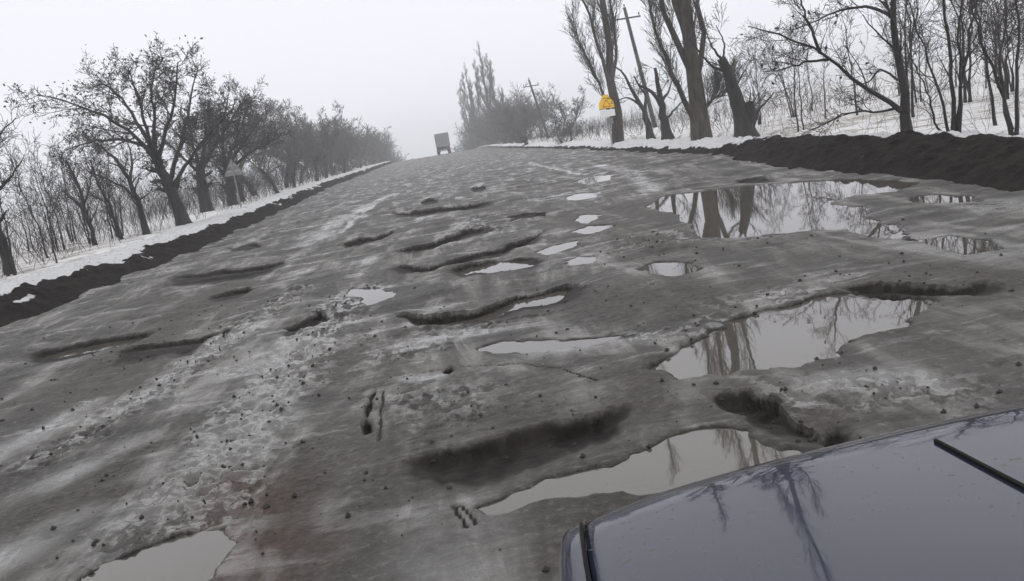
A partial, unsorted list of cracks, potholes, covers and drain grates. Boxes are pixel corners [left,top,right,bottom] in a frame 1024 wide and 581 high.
pothole [631,259,708,277]
pothole [735,175,780,184]
pothole [18,329,159,368]
pothole [710,387,862,449]
pothole [341,230,396,249]
pothole [388,199,498,219]
pothole [903,233,1014,255]
pothole [392,283,600,328]
pothole [640,177,924,241]
pothole [533,238,583,255]
pothole [64,520,244,581]
pothole [387,230,549,277]
